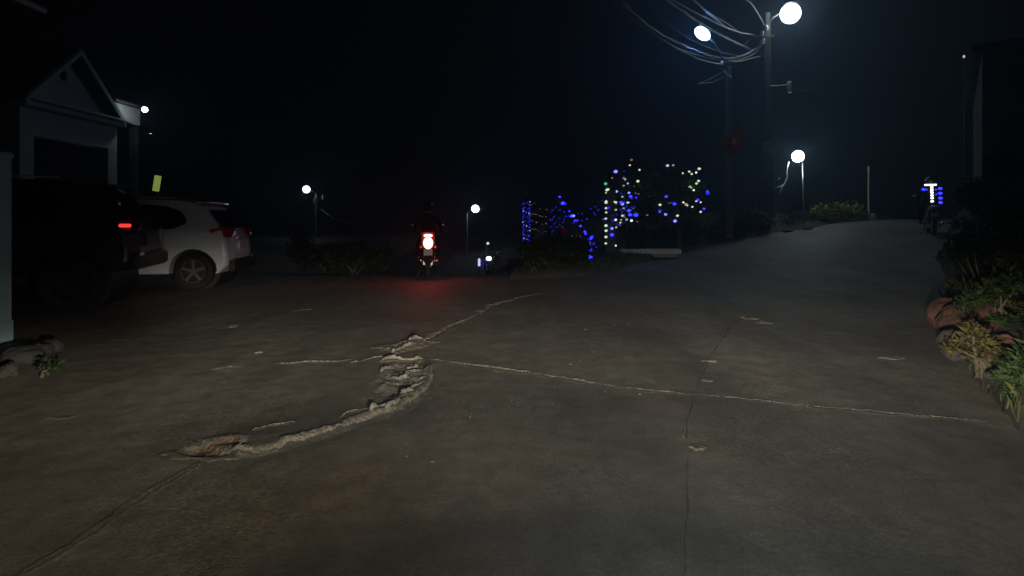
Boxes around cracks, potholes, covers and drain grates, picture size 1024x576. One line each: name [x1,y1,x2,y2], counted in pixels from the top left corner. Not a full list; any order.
crack [14,293,987,576]
